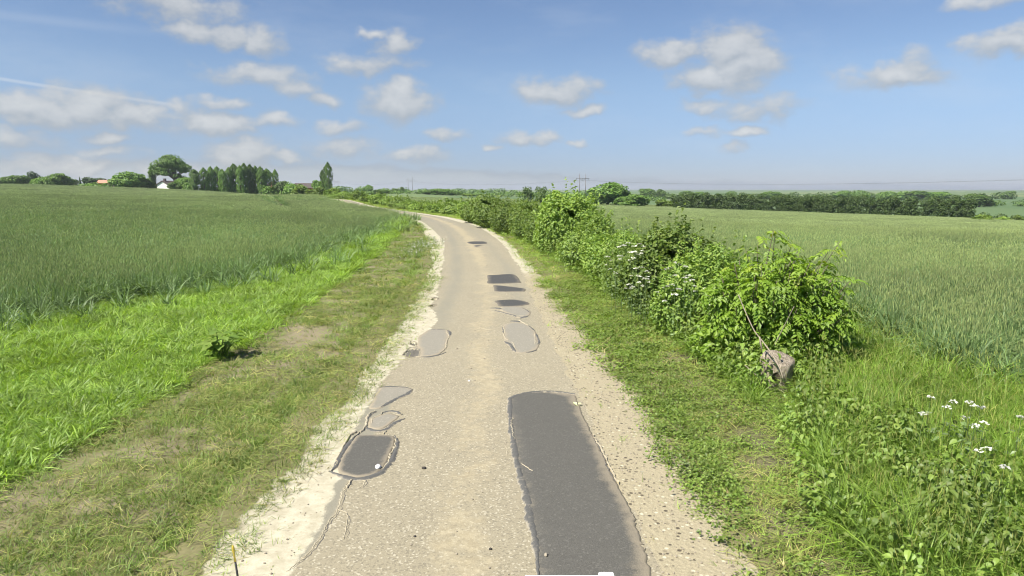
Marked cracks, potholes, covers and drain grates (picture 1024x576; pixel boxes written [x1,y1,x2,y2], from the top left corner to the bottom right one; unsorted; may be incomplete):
crack [287,410,402,571]
